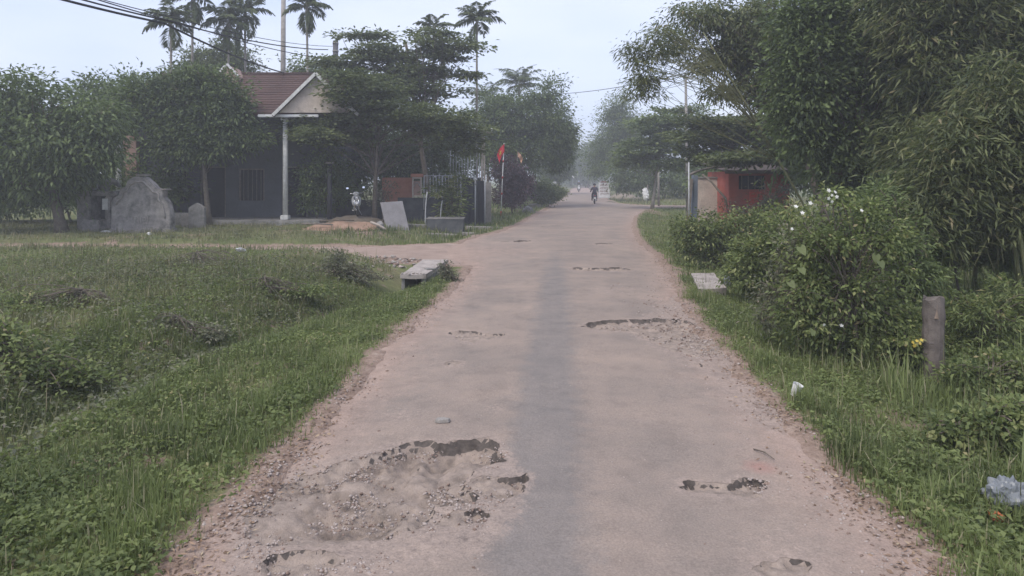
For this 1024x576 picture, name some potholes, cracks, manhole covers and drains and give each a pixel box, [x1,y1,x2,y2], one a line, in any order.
pothole [752,558,812,576]
pothole [242,436,507,548]
pothole [467,473,529,503]
pothole [679,477,768,499]
pothole [448,331,506,344]
